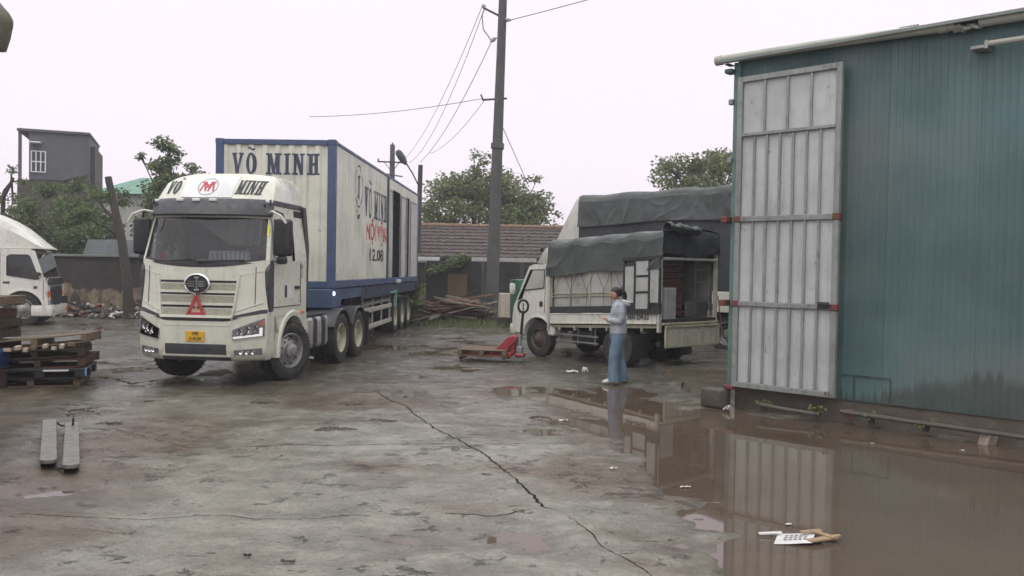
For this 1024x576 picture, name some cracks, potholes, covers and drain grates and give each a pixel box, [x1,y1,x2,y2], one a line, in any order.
crack [5,390,677,576]
crack [90,375,168,385]
